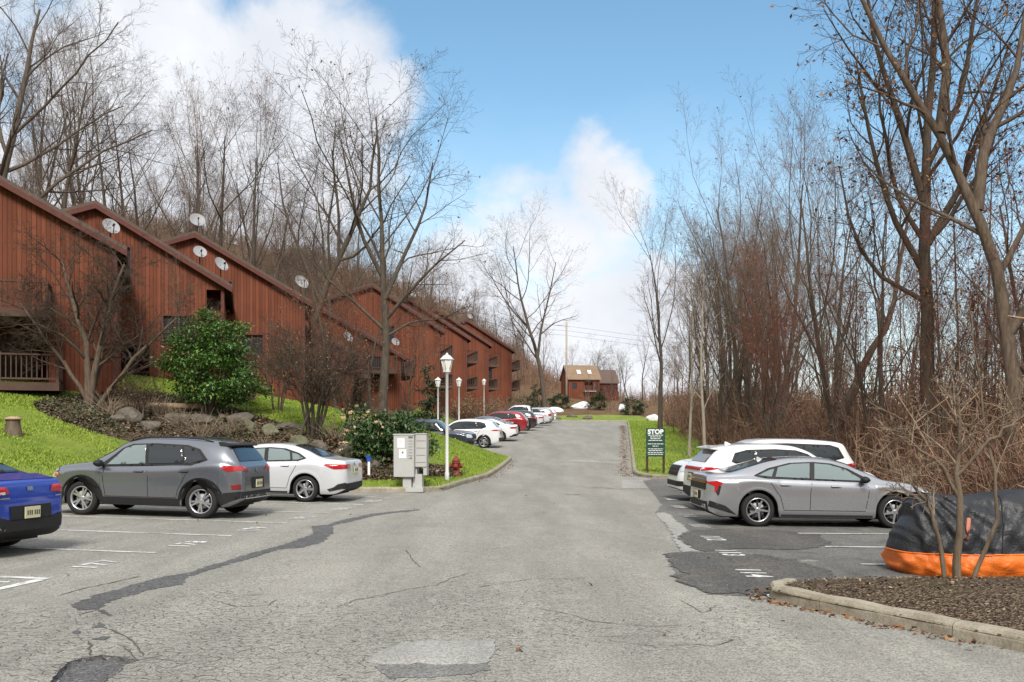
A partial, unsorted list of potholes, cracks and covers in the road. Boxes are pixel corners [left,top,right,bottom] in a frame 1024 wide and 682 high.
crack [0,509,835,682]
